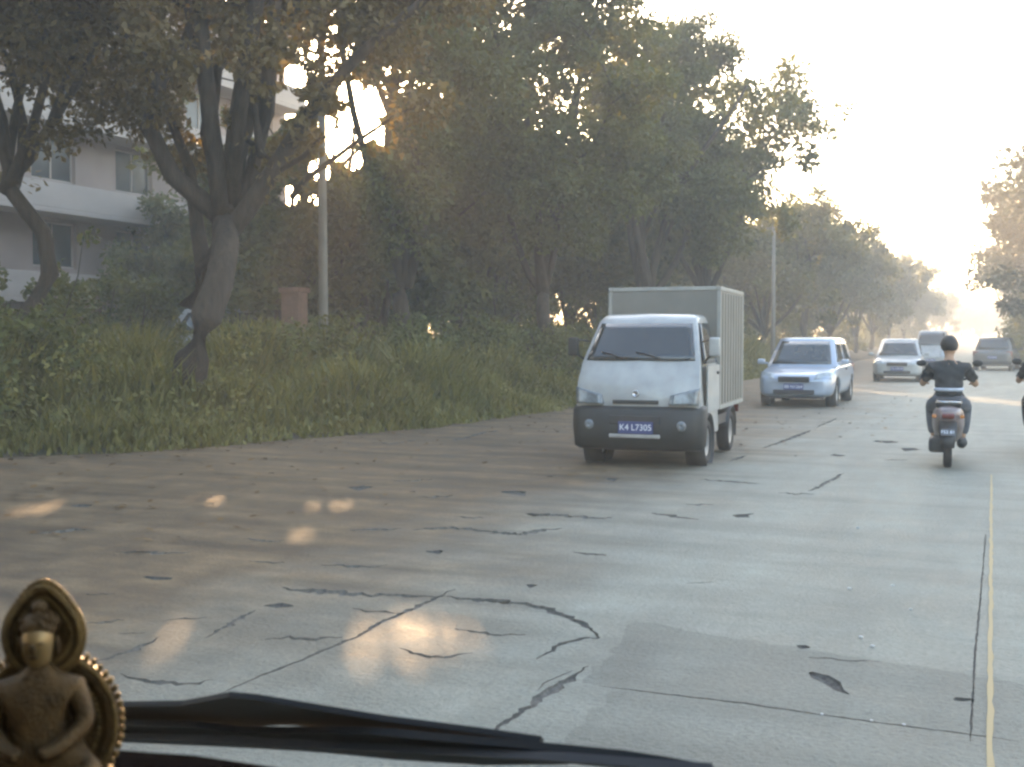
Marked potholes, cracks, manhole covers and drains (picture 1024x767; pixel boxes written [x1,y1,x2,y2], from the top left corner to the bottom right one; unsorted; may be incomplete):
crack [350,513,612,556]
crack [787,473,844,495]
crack [730,418,836,461]
crack [653,504,714,520]
crack [88,610,255,686]
crack [282,587,600,730]
pothole [809,672,849,694]
